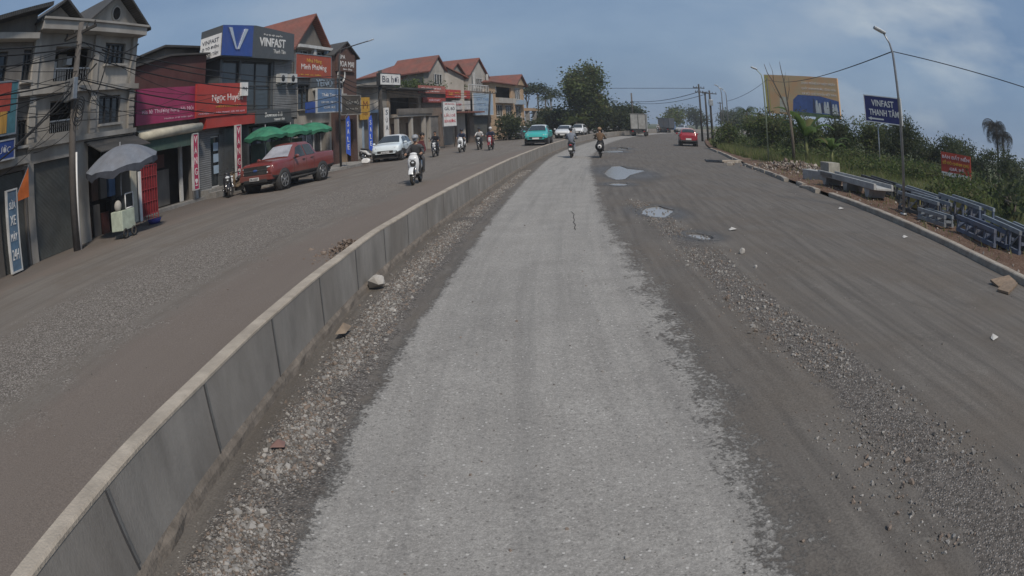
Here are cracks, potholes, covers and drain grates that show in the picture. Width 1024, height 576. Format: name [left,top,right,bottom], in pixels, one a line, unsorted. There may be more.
pothole [635,205,679,219]
pothole [681,231,720,241]
pothole [600,166,648,180]
